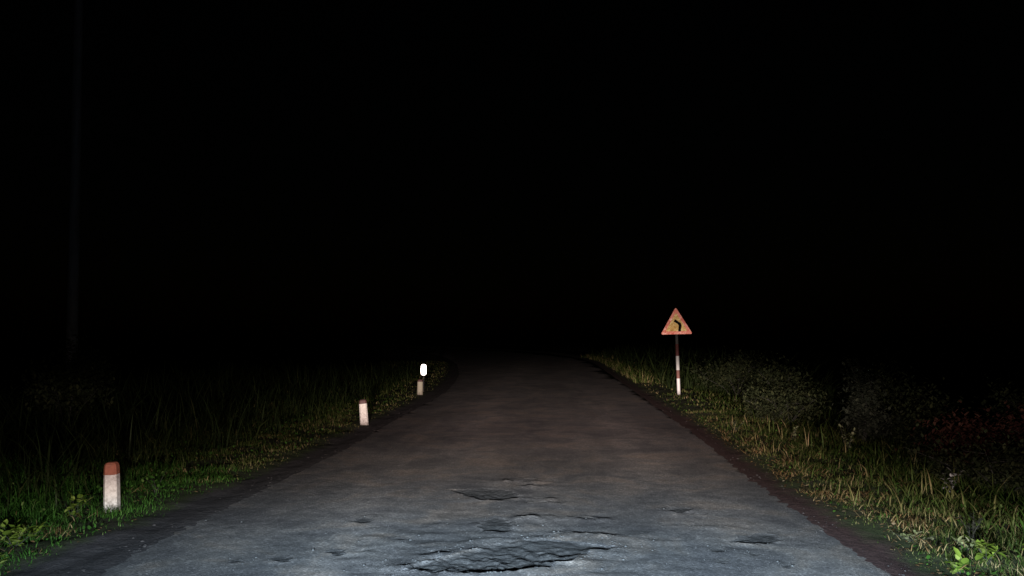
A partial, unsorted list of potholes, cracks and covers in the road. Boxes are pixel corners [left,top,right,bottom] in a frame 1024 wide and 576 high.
pothole [729,533,783,544]
crack [514,478,619,536]
pothole [444,488,521,501]
pothole [400,537,620,574]
pothole [475,515,515,532]
pothole [325,548,346,556]
